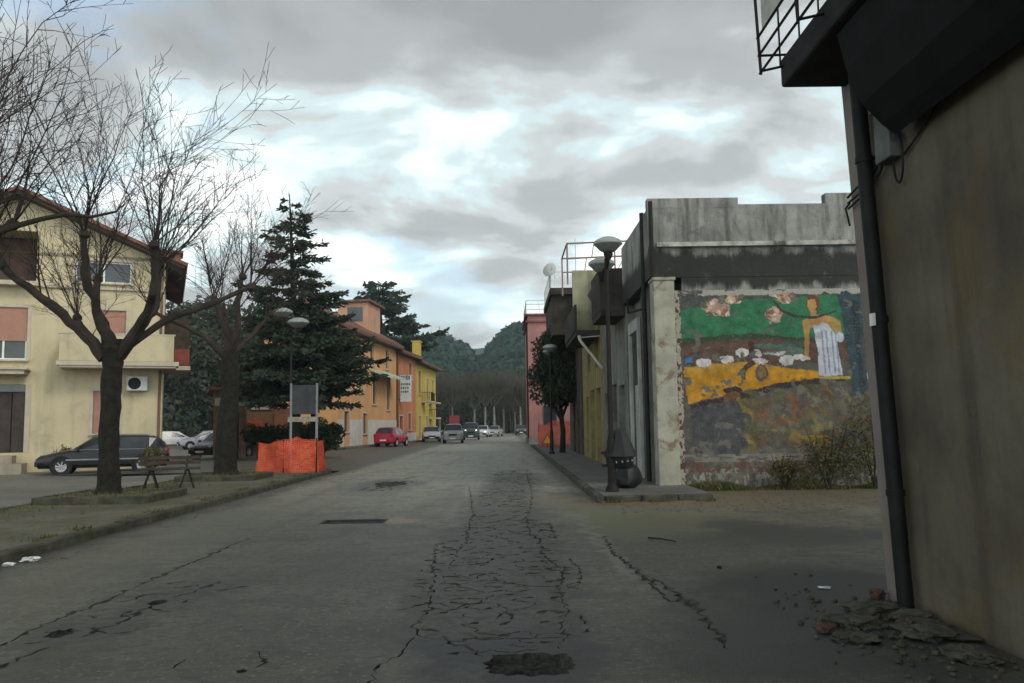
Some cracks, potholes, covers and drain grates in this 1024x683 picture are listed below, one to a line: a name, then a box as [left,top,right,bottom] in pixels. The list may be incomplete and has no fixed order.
crack [602,535,727,649]
pothole [483,652,575,677]
crack [0,539,248,669]
crack [366,470,592,683]
